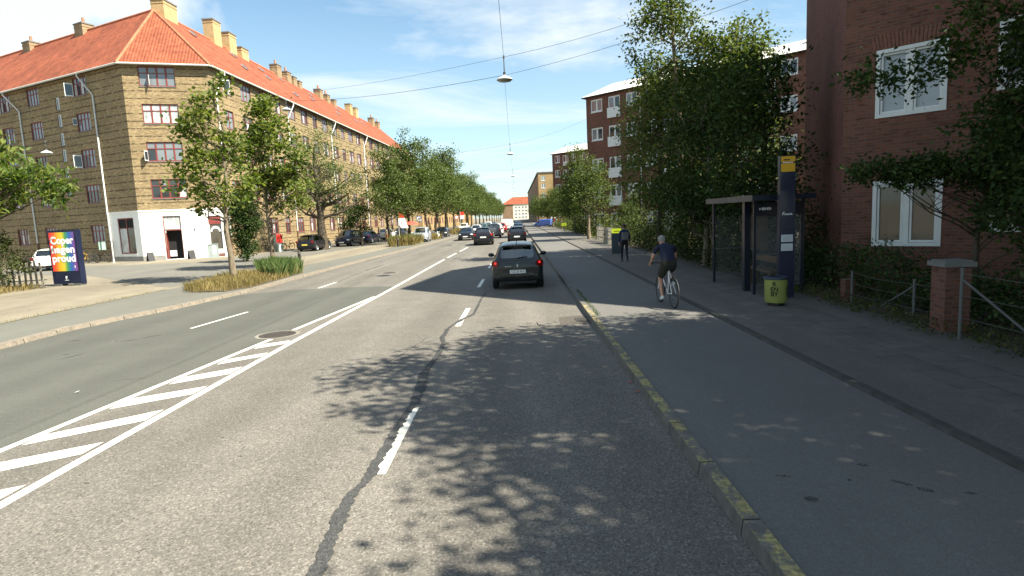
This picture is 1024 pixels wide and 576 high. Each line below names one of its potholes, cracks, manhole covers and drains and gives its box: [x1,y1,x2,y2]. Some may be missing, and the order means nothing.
manhole cover [255,330,300,339]
